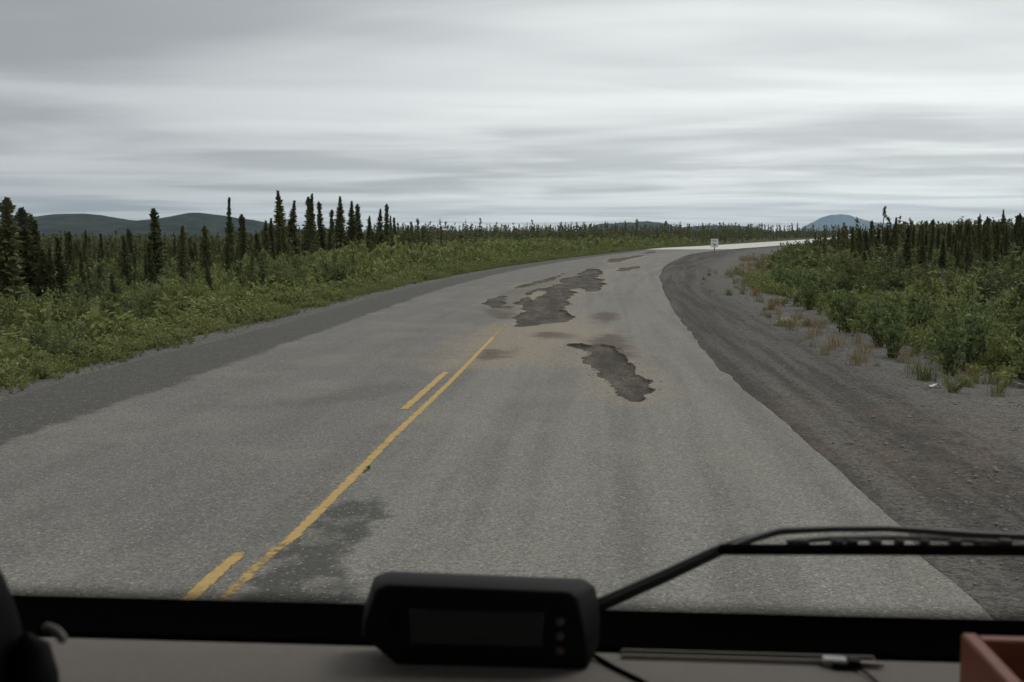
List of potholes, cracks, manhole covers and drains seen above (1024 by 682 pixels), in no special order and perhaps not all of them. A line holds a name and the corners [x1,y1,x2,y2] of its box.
pothole [481,295,513,309]
pothole [566,343,655,402]
pothole [512,269,606,327]
